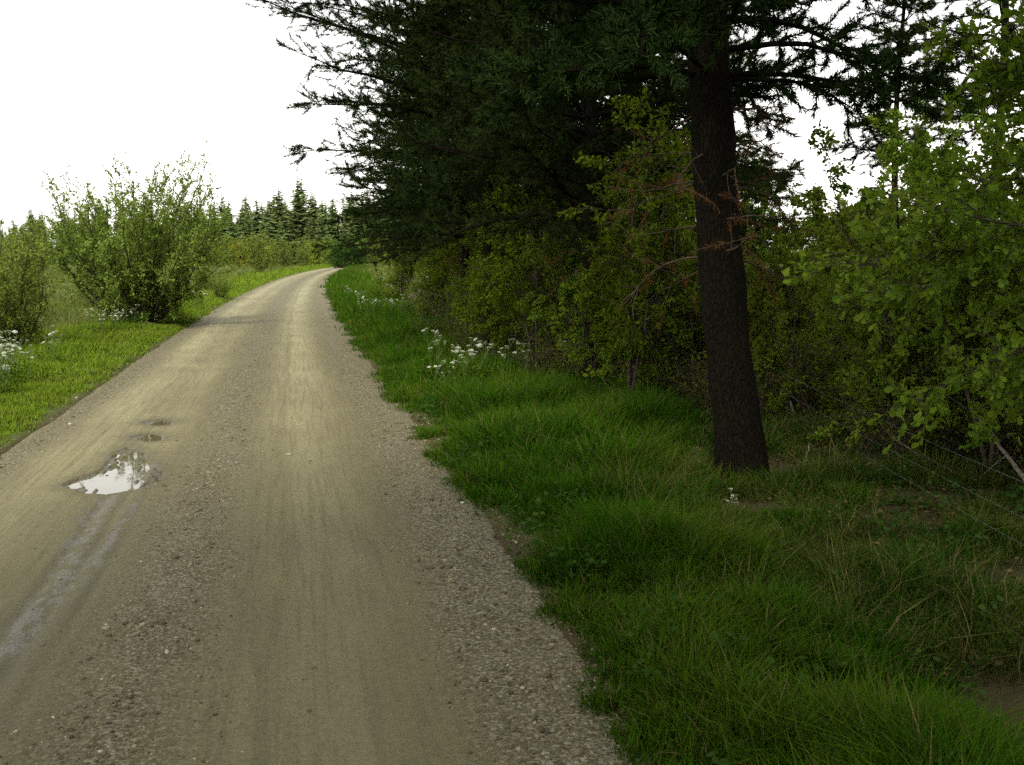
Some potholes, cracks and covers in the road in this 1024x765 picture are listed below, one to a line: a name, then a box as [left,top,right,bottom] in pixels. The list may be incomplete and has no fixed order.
pothole [127,432,168,442]
pothole [138,418,179,426]
pothole [58,446,170,495]
